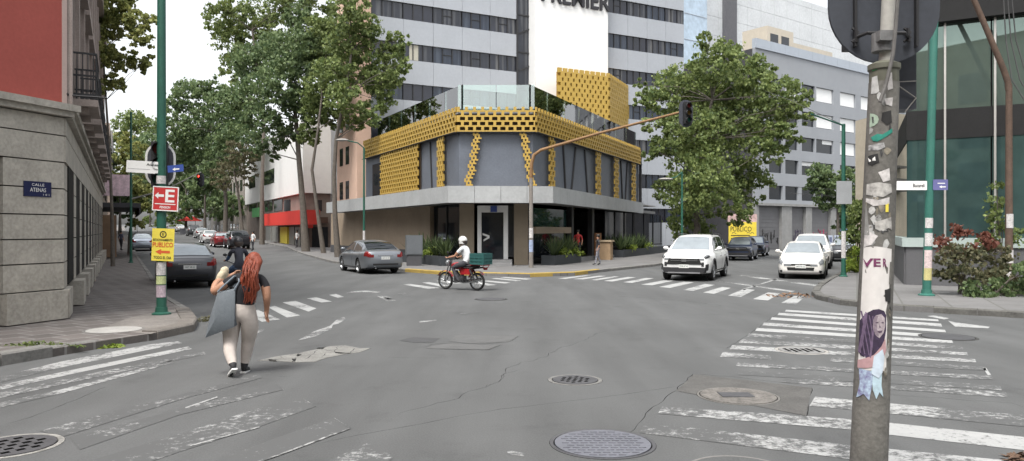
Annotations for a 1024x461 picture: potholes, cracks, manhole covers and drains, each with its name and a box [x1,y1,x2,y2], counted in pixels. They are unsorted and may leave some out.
manhole cover [82,326,145,334]
manhole cover [550,429,656,460]
manhole cover [697,387,781,406]
manhole cover [918,333,979,341]
drain grate [775,346,829,355]
crack [398,332,602,414]
